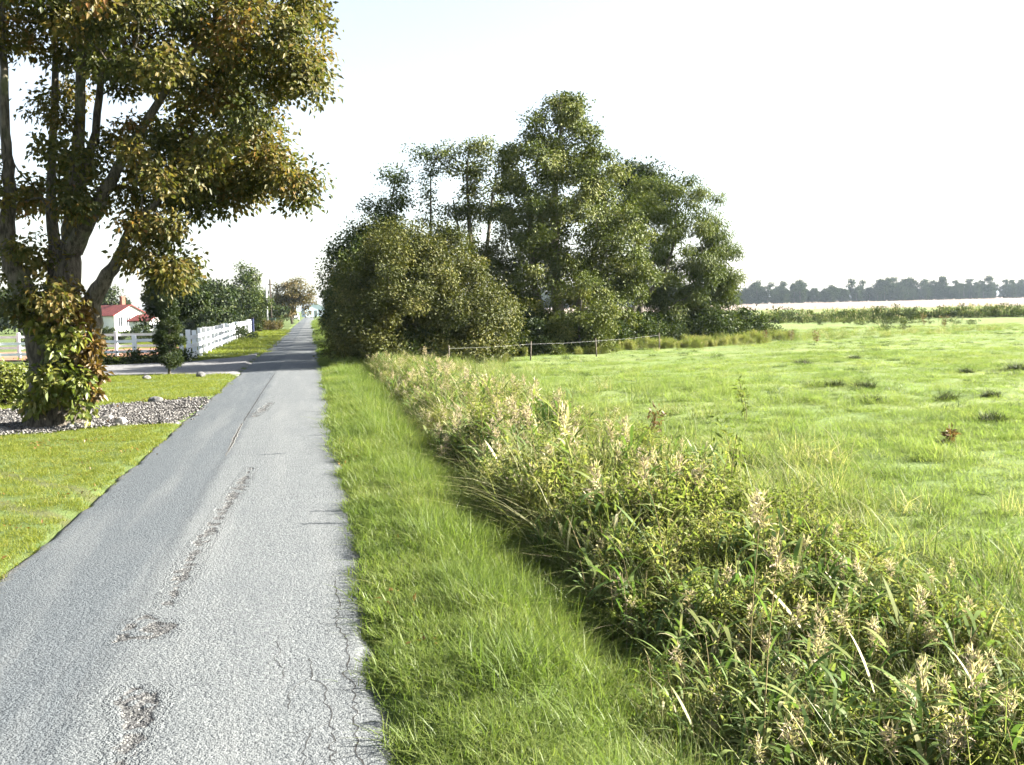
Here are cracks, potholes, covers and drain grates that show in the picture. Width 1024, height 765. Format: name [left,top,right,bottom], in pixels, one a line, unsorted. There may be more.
pothole [92,682,176,765]
pothole [102,612,187,646]
crack [262,580,366,765]
